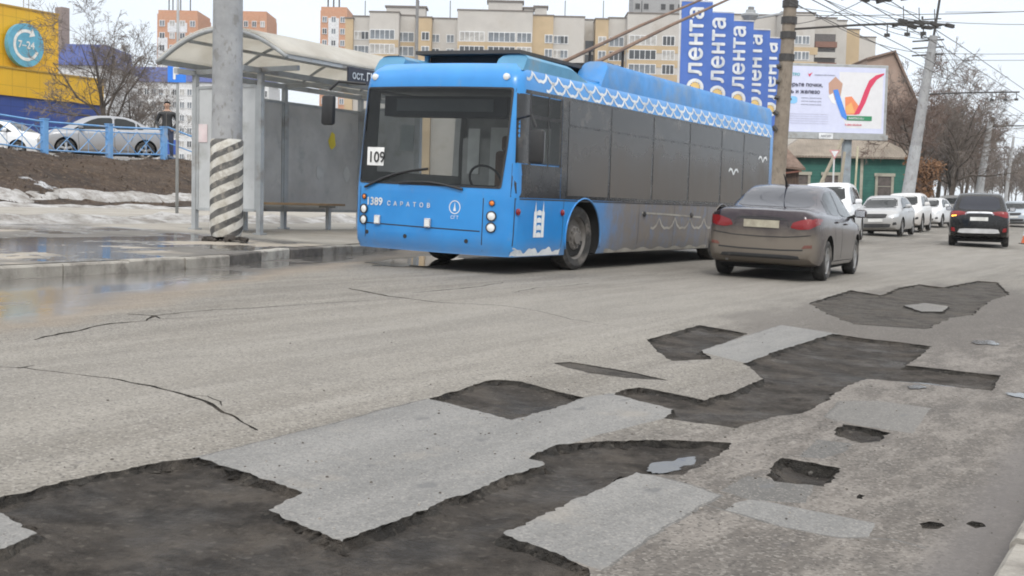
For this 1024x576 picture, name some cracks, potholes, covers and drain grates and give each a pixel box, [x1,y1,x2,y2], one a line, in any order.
crack [13,365,258,430]
pothole [647,325,747,361]
pothole [766,458,841,486]
crack [35,282,612,340]
pothole [810,281,1010,329]
pothole [555,362,665,380]
pothole [615,334,1000,428]
pothole [429,380,584,420]
pothole [919,521,945,529]
pothole [834,424,890,443]
pothole [0,440,731,576]
